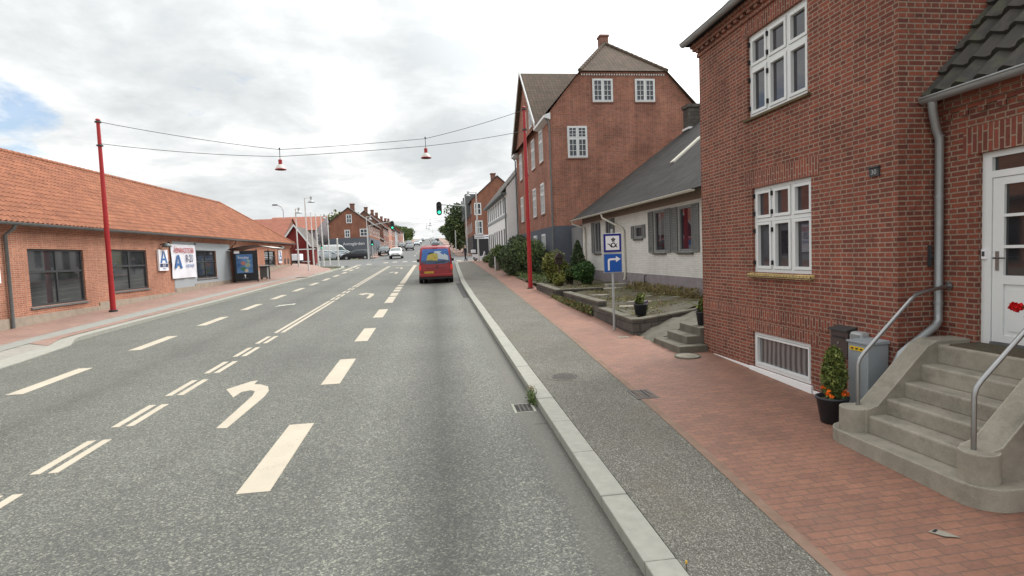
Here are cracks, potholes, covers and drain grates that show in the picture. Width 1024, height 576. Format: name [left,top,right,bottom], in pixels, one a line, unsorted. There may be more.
manhole cover [549,373,581,381]
drain grate [511,403,537,413]
drain grate [627,389,659,400]
